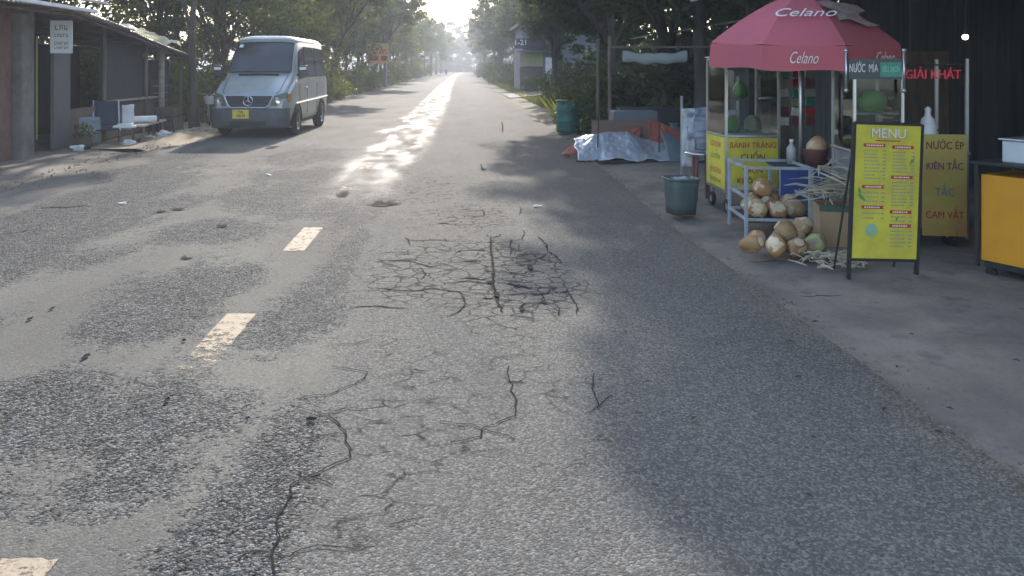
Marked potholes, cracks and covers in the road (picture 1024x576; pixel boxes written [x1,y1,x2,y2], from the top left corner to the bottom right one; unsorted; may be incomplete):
crack [349,208,579,326]
pothole [368,199,397,207]
crack [440,366,518,442]
crack [239,544,355,557]
crack [587,373,613,413]
crack [299,366,368,485]
